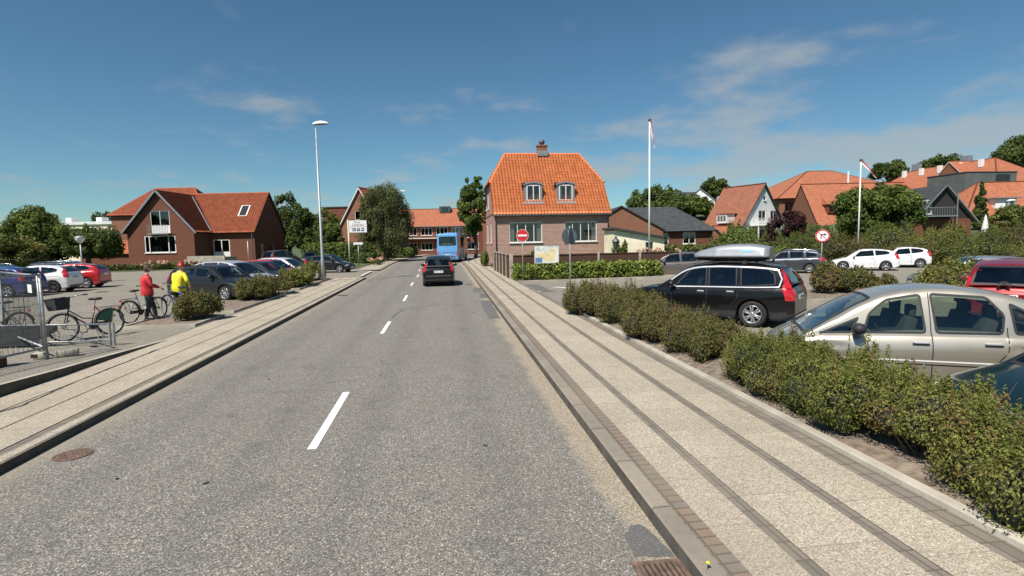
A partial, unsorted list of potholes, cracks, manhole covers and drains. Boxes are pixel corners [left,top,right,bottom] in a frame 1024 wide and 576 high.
manhole cover [51,448,94,462]
drain grate [631,558,692,576]
